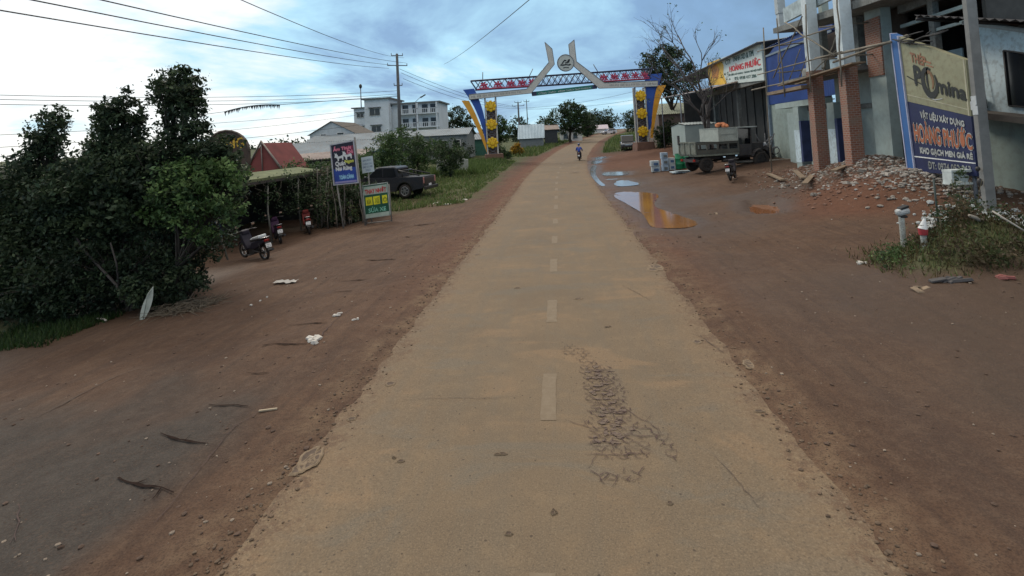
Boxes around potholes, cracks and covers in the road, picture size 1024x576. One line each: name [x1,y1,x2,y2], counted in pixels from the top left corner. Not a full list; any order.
crack [564,345,677,487]
